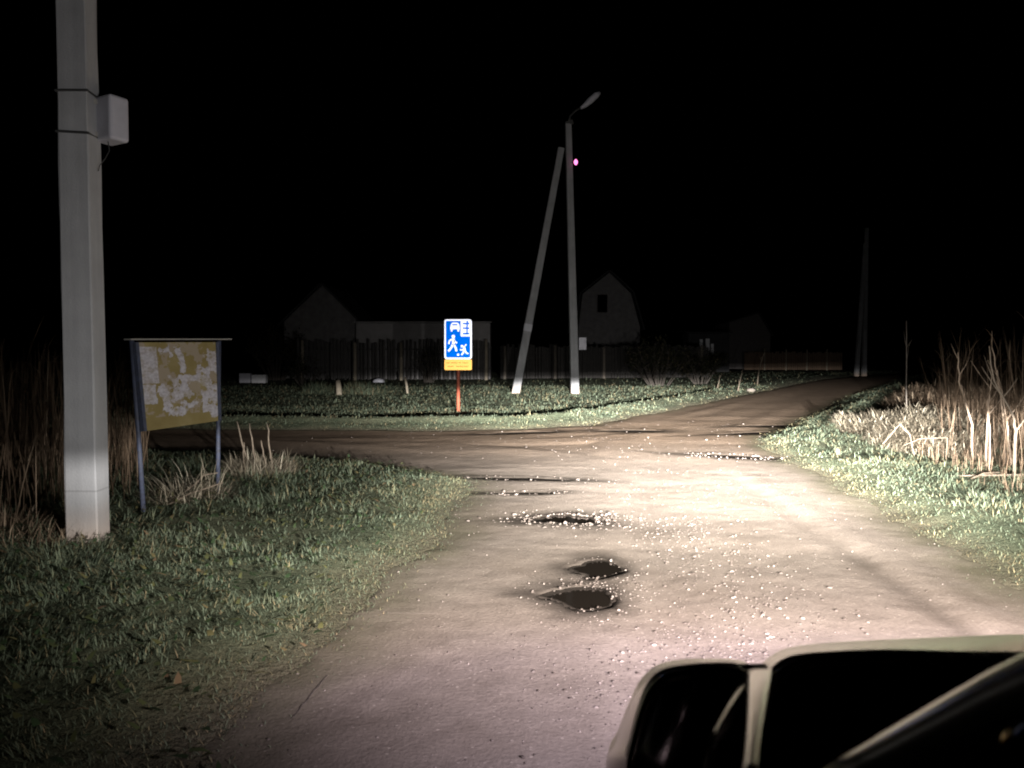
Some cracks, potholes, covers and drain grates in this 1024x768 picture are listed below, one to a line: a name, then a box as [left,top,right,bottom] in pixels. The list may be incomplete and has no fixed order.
pothole [538,587,616,611]
crack [292,675,328,718]
pothole [567,560,625,579]
pothole [525,515,601,525]
